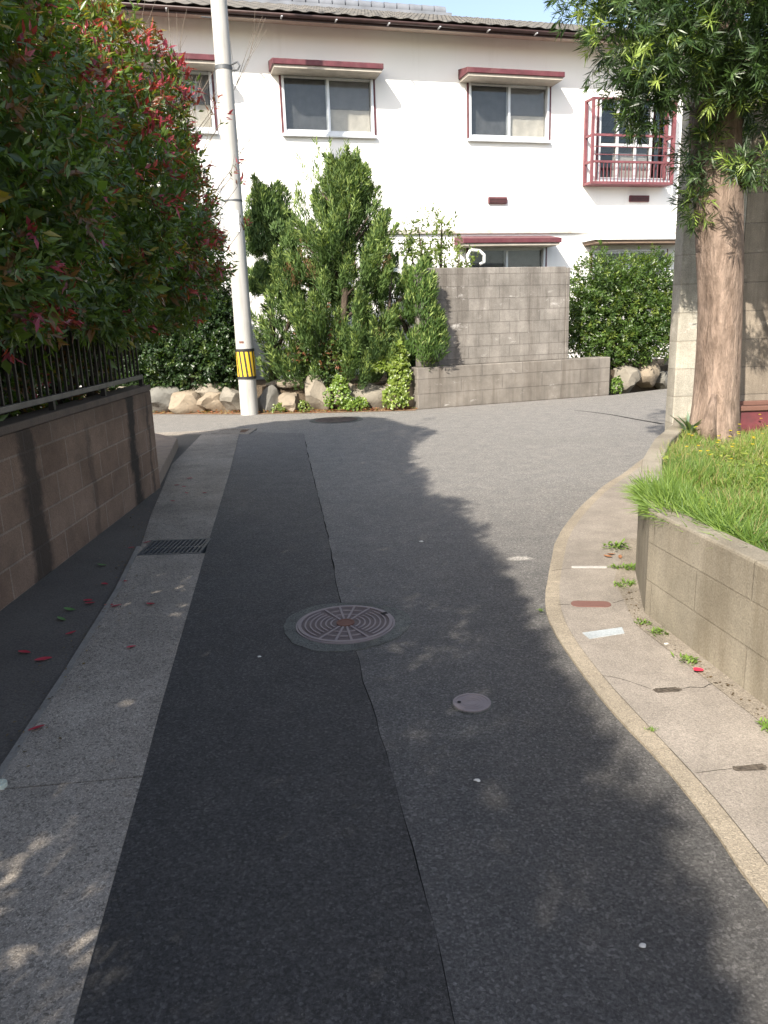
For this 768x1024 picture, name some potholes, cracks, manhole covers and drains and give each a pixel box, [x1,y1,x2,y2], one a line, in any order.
manhole cover [309,416,363,424]
drain grate [137,538,212,556]
manhole cover [283,602,412,652]
manhole cover [451,693,493,714]
